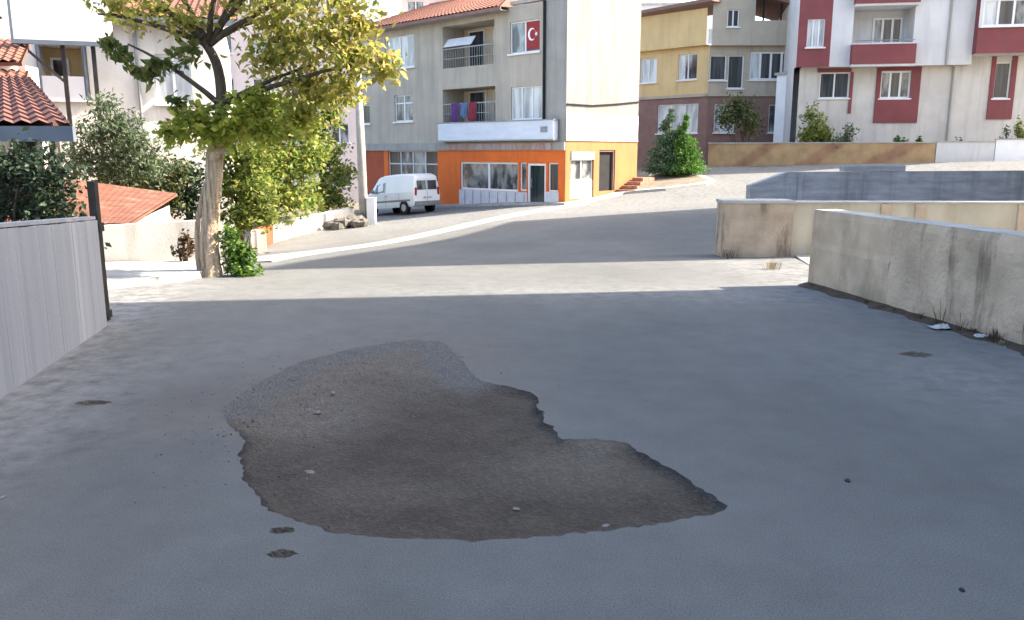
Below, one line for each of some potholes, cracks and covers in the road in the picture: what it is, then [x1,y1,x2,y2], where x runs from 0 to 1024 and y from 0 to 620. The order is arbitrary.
pothole [266,549,299,558]
pothole [221,339,727,542]
